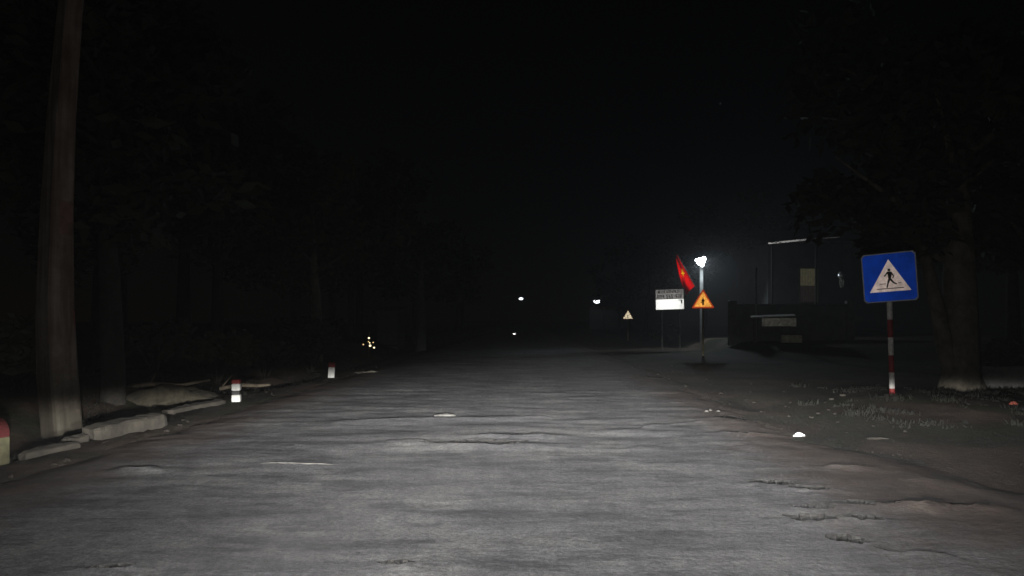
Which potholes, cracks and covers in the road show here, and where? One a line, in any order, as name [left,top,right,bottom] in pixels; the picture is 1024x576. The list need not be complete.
pothole [825,533,876,544]
pothole [782,513,839,521]
